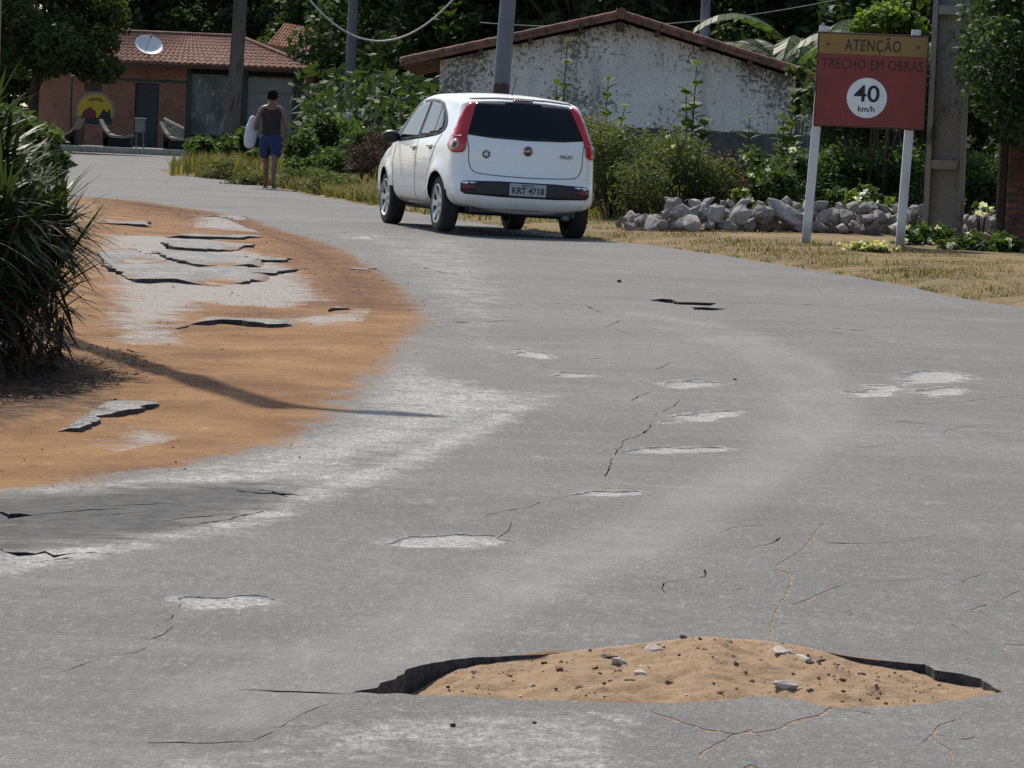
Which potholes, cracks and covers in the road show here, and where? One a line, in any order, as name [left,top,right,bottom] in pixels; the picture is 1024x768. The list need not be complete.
pothole [353,636,1002,708]
pothole [508,349,551,359]
crack [0,488,296,563]
crack [651,707,877,768]
crack [59,604,181,673]
crack [720,524,938,642]
crack [605,392,679,477]
pothole [665,379,724,388]
pothole [661,411,739,424]
crack [148,689,341,744]
pothole [385,534,515,548]
pothole [842,371,975,397]
